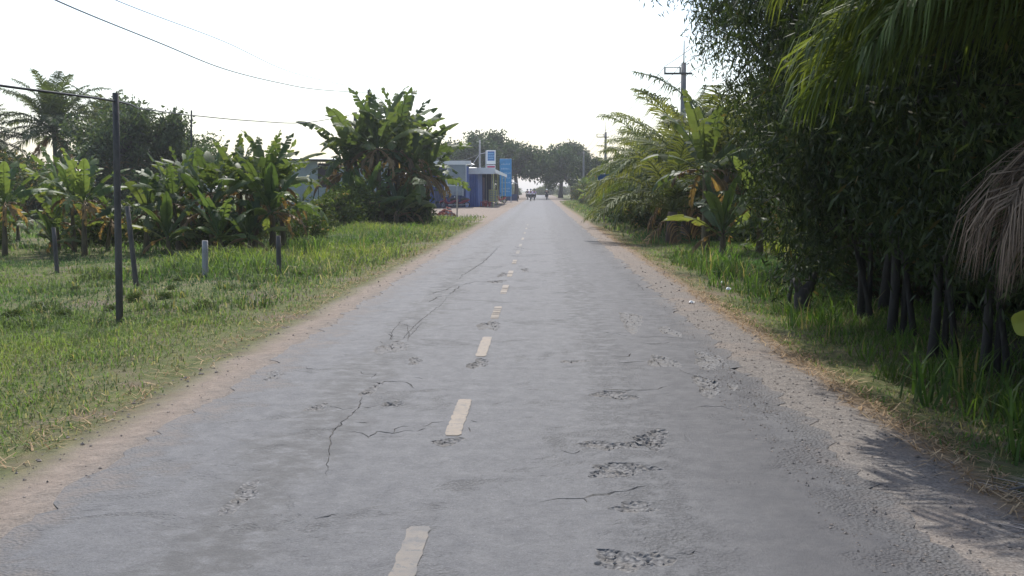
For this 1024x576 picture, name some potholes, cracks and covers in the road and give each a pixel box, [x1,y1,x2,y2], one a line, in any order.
pothole [632,428,669,452]
pothole [588,390,640,400]
crack [542,486,644,502]
pothole [466,358,489,369]
pothole [607,501,659,513]
pothole [476,320,501,331]
pothole [647,354,682,367]
pothole [576,441,646,451]
pothole [431,437,466,447]
crack [325,372,444,474]
pothole [217,479,260,516]
pothole [587,462,665,478]
